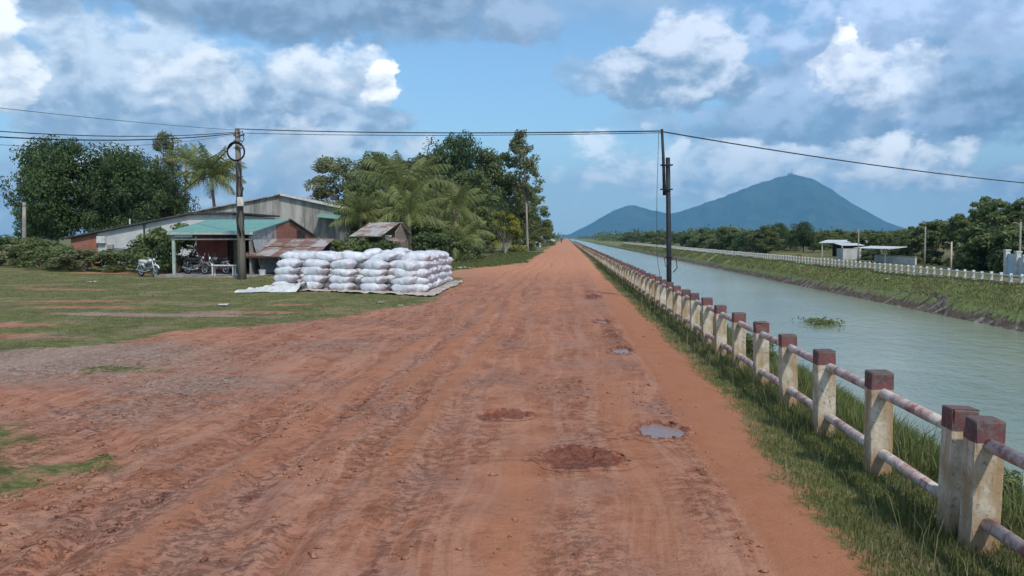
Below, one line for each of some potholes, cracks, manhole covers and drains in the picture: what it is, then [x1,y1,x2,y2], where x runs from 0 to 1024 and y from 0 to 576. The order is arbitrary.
pothole [629,418,695,443]
pothole [477,407,538,421]
pothole [528,444,640,472]
pothole [606,345,636,355]
